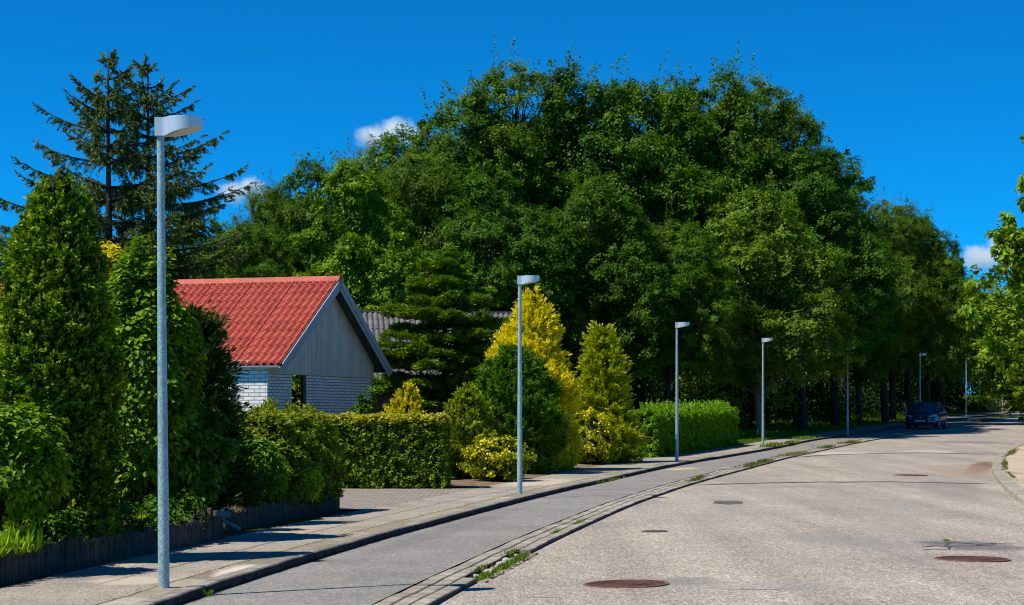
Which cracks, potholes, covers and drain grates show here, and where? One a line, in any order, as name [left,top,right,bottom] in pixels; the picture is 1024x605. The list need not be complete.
manhole cover [583,579,669,588]
